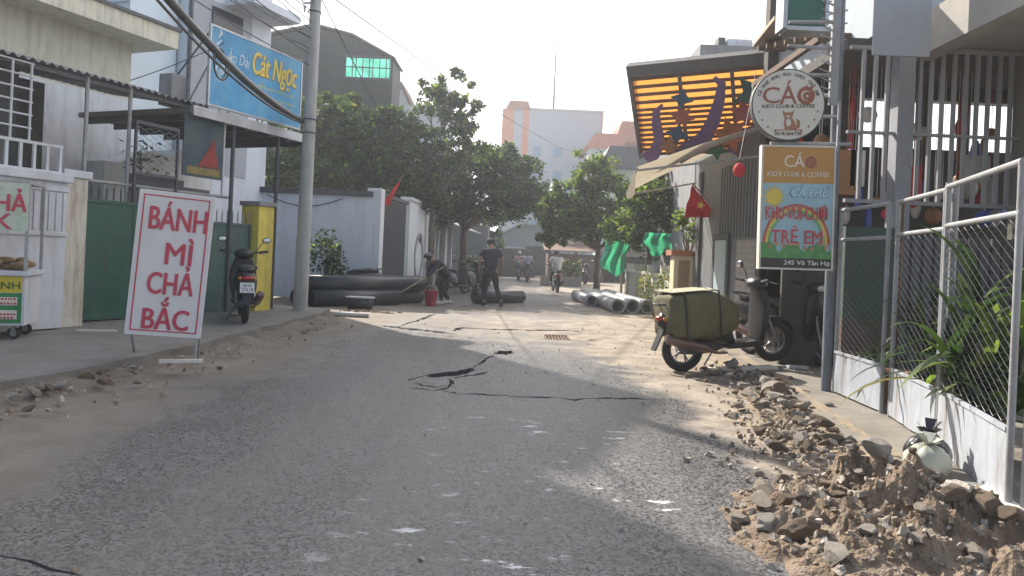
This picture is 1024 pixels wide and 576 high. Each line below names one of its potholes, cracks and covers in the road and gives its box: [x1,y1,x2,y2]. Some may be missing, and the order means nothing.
crack [0,555,81,576]
crack [454,327,593,341]
crack [407,355,650,401]
